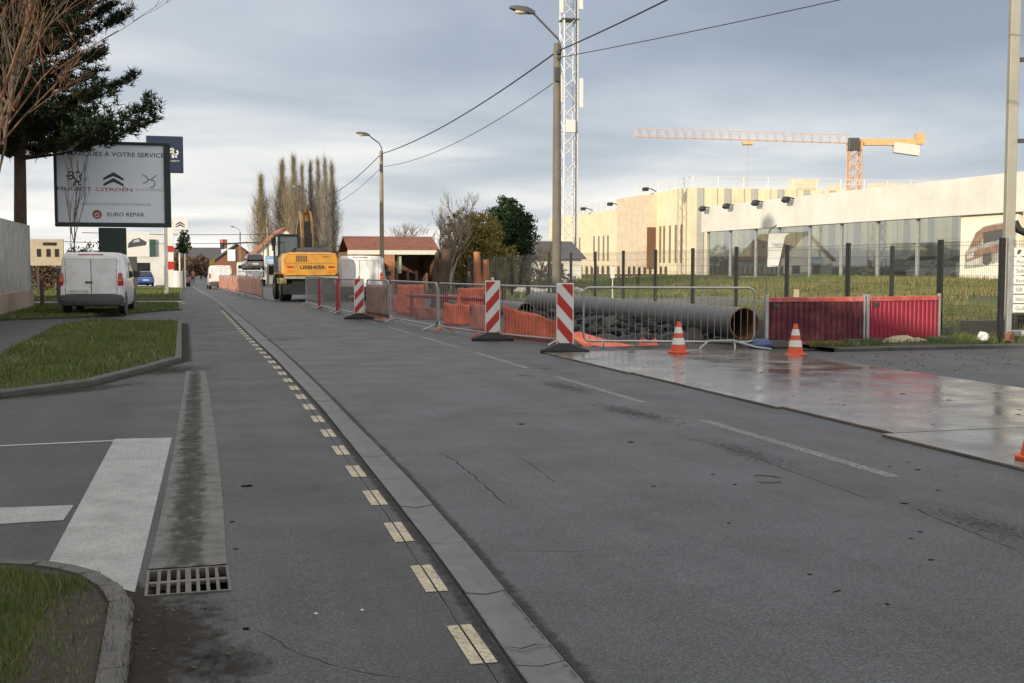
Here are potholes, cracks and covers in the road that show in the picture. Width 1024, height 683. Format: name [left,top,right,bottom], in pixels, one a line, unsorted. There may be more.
crack [439,453,504,503]
crack [257,630,394,677]
drain grate [144,565,232,597]
